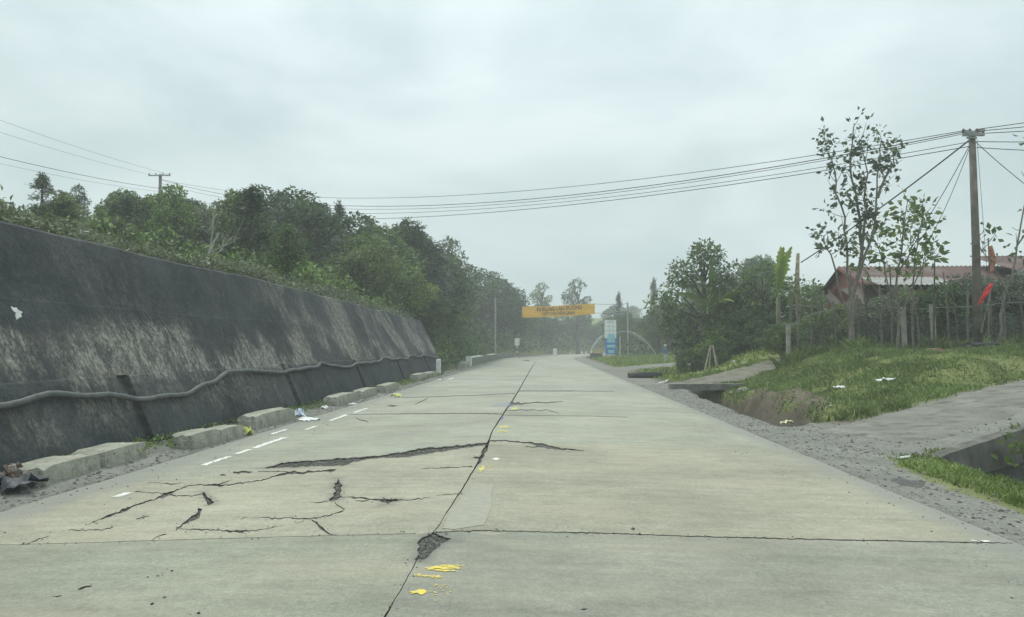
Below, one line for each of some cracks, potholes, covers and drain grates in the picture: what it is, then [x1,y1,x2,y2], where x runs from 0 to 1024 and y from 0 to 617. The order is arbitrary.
pothole [416,533,451,562]
crack [70,440,584,541]
crack [506,401,563,414]
